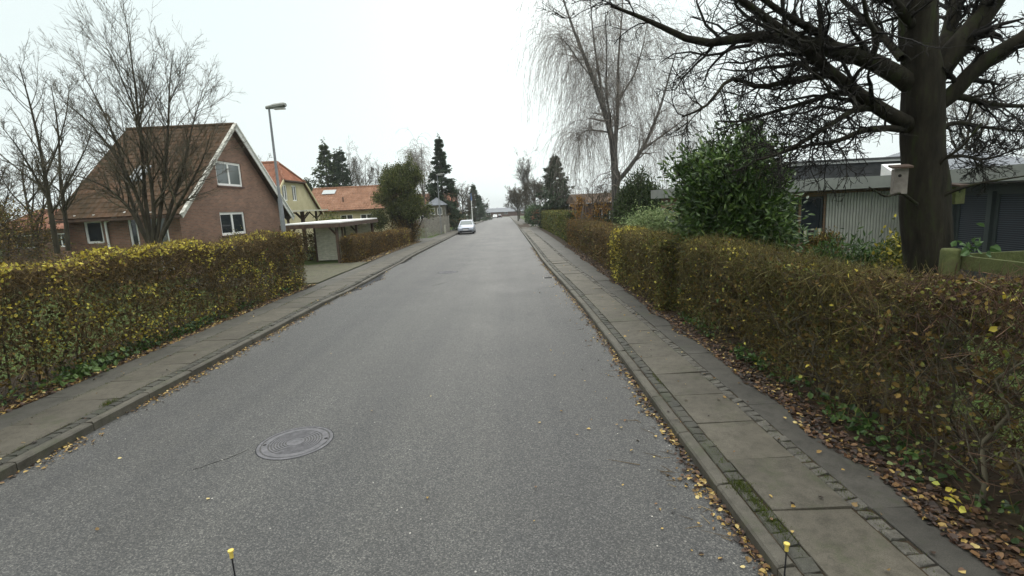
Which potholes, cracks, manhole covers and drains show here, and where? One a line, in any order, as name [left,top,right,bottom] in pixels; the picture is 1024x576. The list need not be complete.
manhole cover [255,426,334,460]
